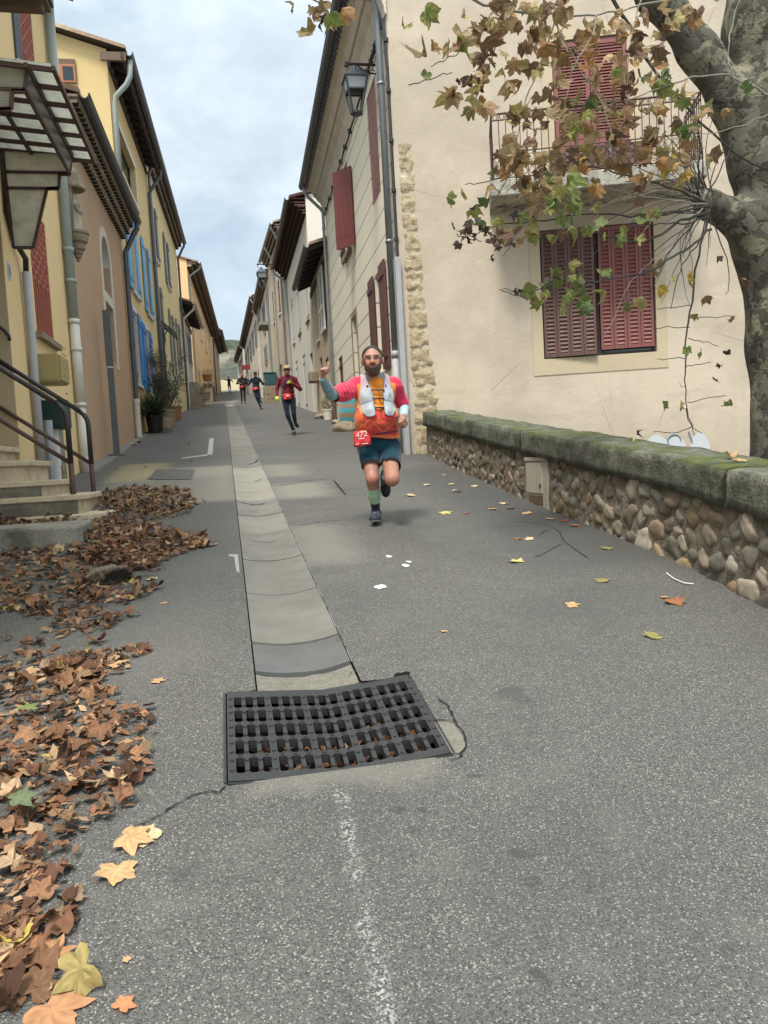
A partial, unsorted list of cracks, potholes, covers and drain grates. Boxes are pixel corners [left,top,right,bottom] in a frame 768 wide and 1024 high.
manhole cover [147,469,195,480]
crack [422,697,467,760]
drain grate [223,675,455,786]
crack [510,521,587,557]
crack [135,783,228,826]
